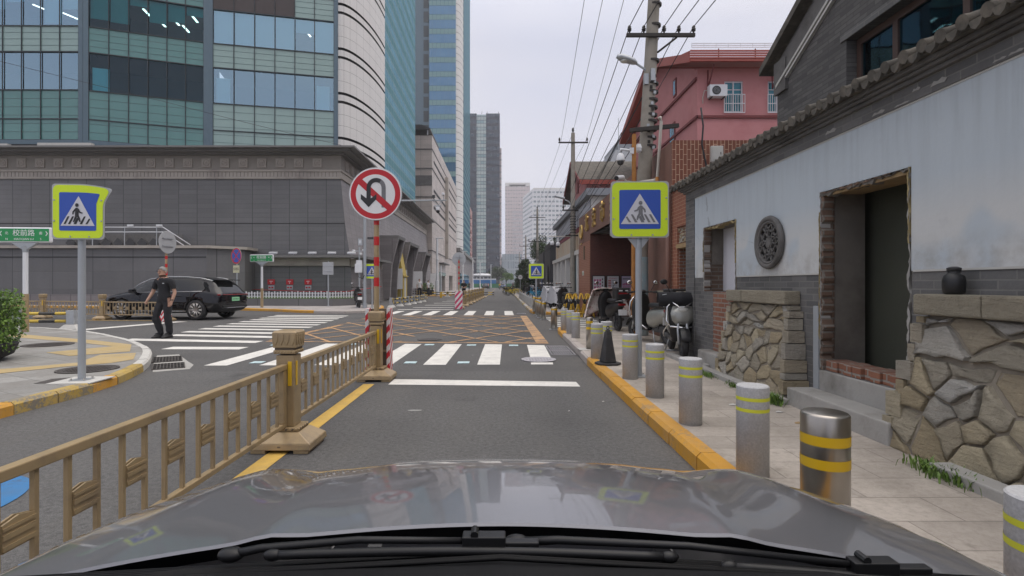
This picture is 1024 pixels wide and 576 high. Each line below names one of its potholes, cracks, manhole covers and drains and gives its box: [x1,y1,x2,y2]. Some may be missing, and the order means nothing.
drain grate [151,362,185,370]
manhole cover [54,365,120,374]
drain grate [151,355,182,363]
